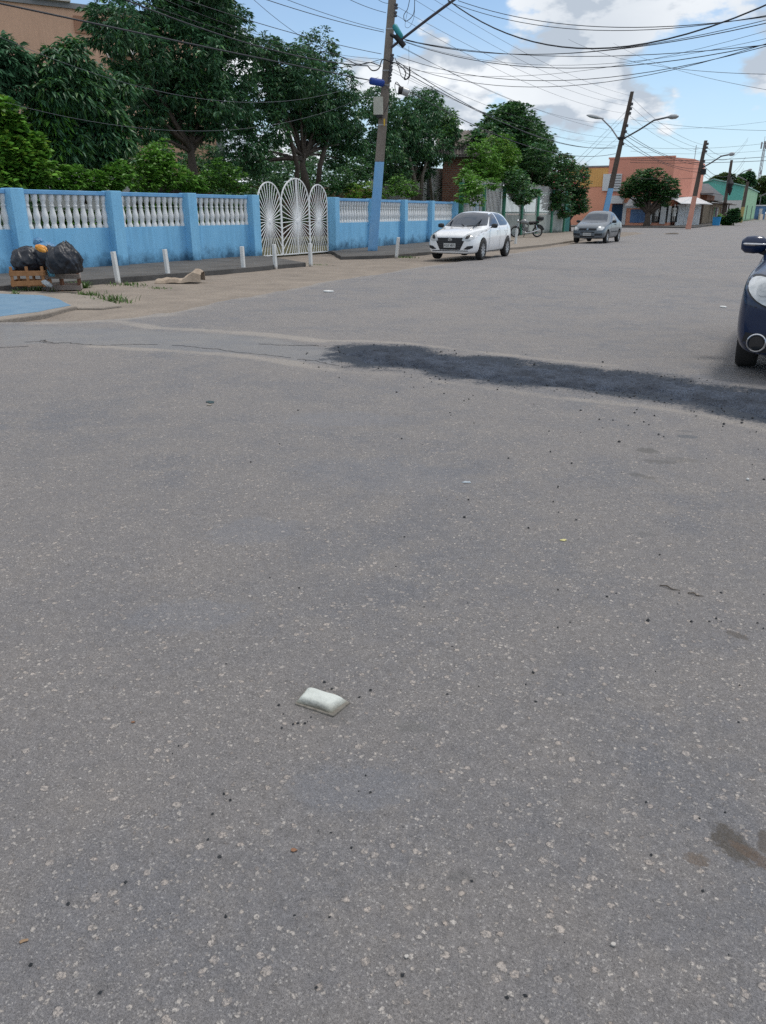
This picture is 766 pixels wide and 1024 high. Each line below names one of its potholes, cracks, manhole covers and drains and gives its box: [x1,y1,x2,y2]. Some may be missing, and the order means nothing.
crack [0,340,339,366]
